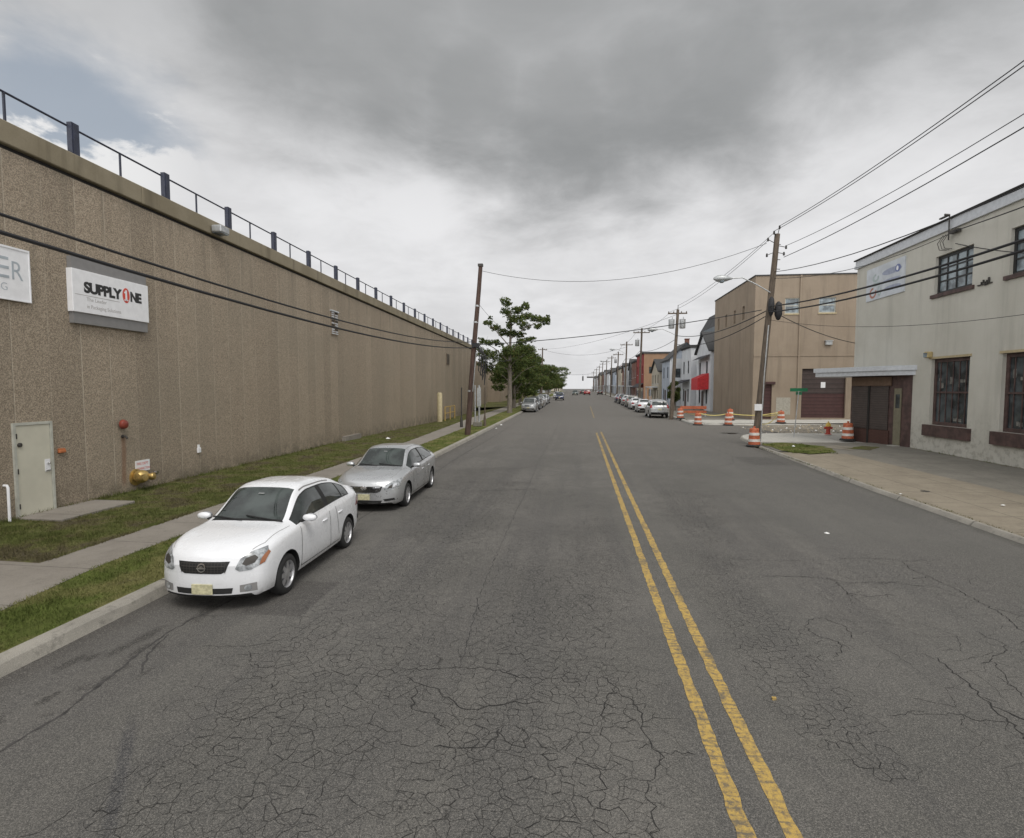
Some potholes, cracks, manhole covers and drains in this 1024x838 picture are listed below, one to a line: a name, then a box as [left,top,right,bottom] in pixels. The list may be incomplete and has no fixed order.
crack [693,554,922,781]
crack [20,482,697,838]
